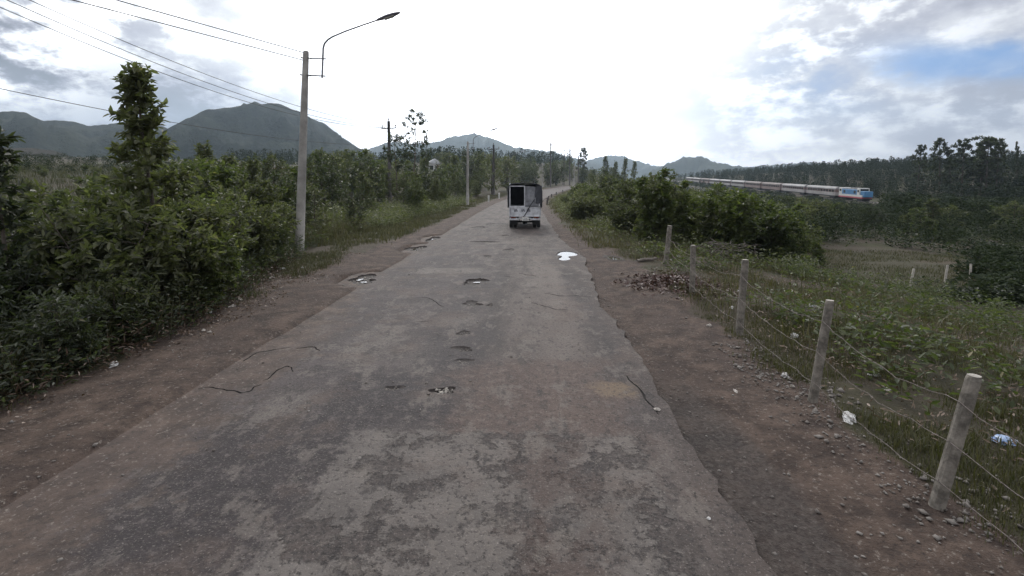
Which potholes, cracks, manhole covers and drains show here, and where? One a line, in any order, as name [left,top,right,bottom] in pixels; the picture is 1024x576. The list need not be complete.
crack [198,346,320,394]
pothole [348,274,376,285]
pothole [464,278,489,286]
crack [627,376,659,415]
pothole [428,386,456,394]
pothole [557,251,578,260]
